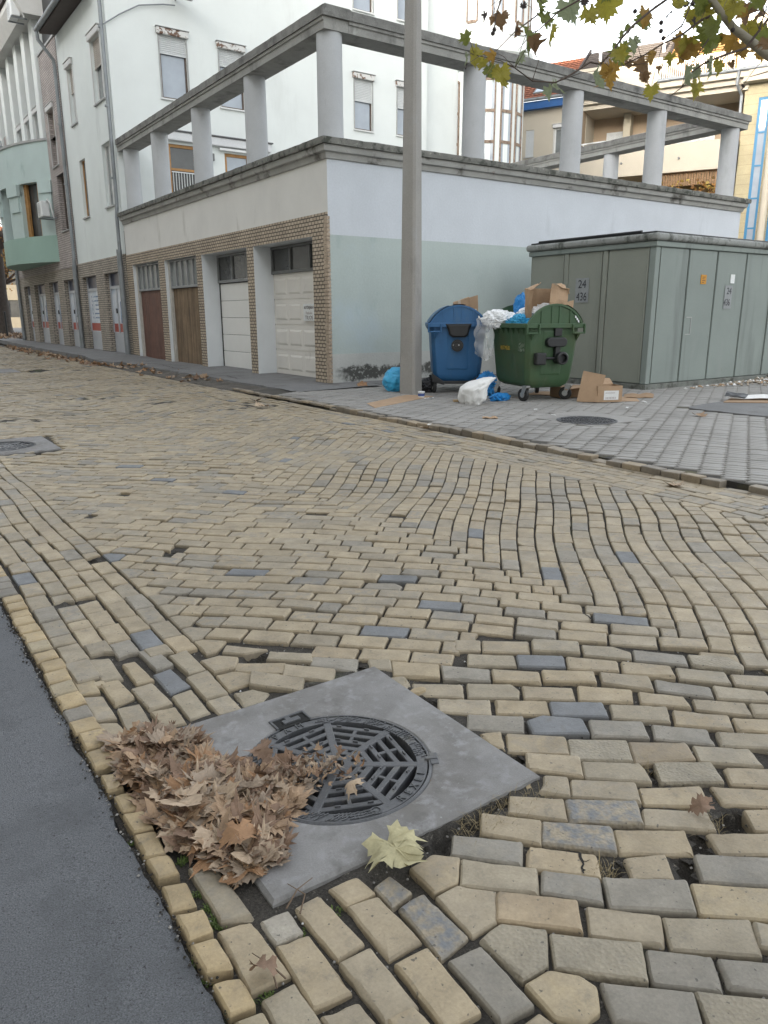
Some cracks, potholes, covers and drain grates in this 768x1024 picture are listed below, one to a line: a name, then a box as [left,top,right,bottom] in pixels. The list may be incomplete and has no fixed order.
crack [578,852,589,873]
